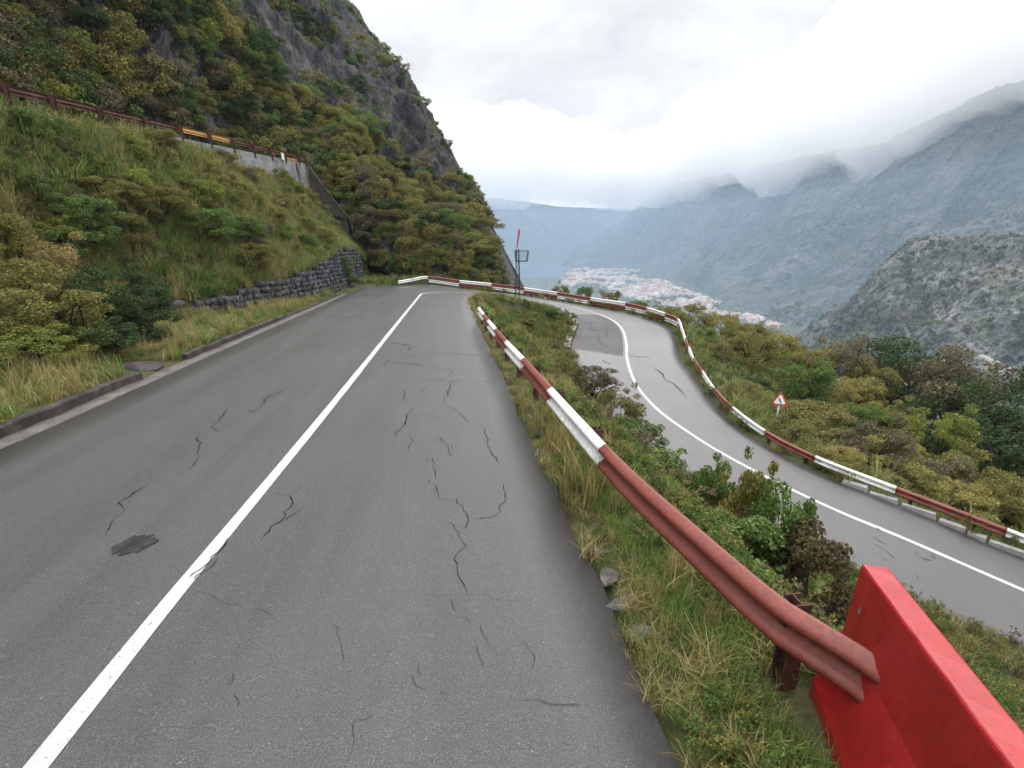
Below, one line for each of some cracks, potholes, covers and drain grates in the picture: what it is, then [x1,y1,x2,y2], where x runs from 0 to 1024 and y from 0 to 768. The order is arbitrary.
crack [396,372,498,460]
crack [427,437,522,668]
